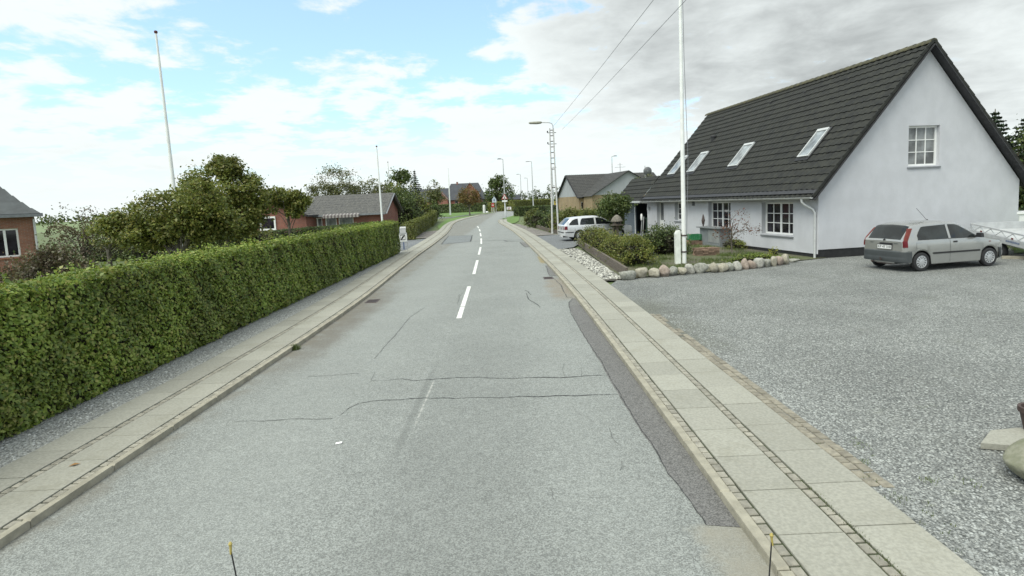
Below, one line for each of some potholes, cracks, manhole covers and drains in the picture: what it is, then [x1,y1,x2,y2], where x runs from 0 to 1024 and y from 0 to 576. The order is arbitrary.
crack [373,365,590,381]
crack [235,394,610,422]
